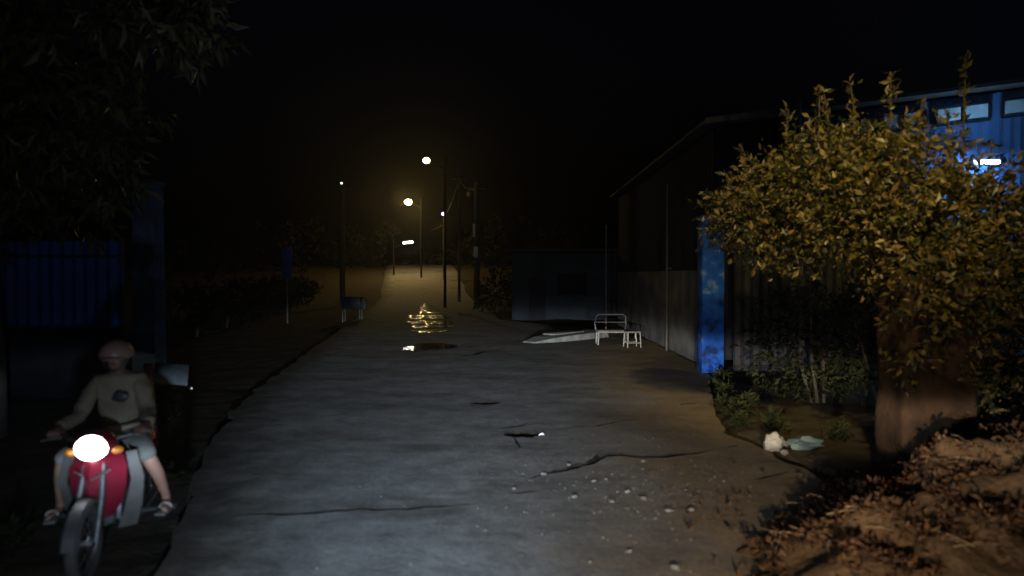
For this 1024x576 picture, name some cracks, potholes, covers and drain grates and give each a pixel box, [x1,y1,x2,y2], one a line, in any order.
crack [549,417,648,430]
pothole [502,430,544,438]
crack [454,349,505,357]
crack [512,445,740,494]
